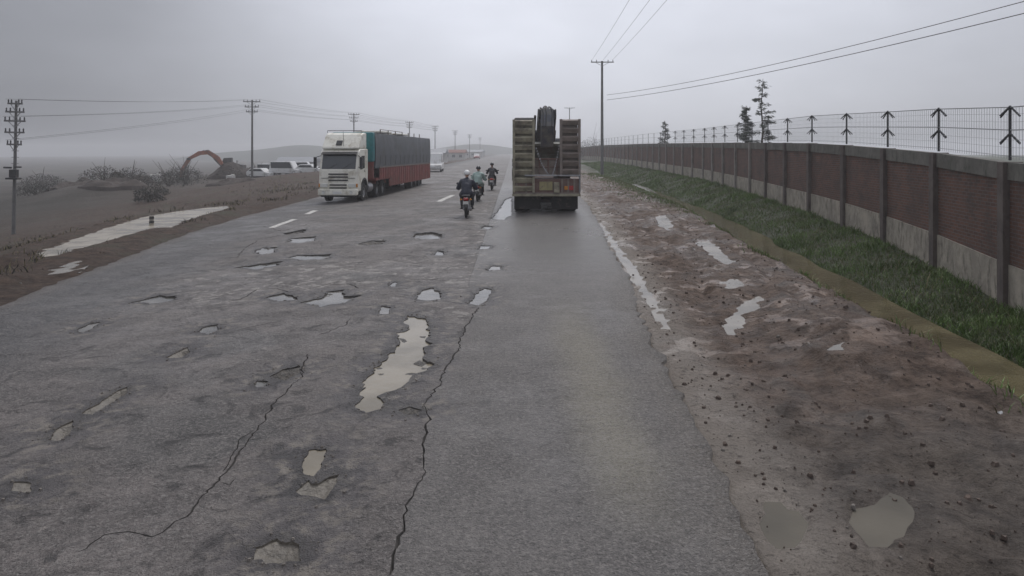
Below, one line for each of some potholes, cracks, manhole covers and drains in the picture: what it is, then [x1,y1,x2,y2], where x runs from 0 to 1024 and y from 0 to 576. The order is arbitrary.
pothole [417,287,442,300]
pothole [355,316,435,413]
pothole [301,449,327,476]
crack [389,308,479,575]
pothole [254,538,301,564]
crack [79,354,308,552]
pothole [167,347,190,358]
pothole [296,474,339,499]
pothole [11,481,32,493]
pothole [301,290,361,307]
pothole [469,288,492,305]
